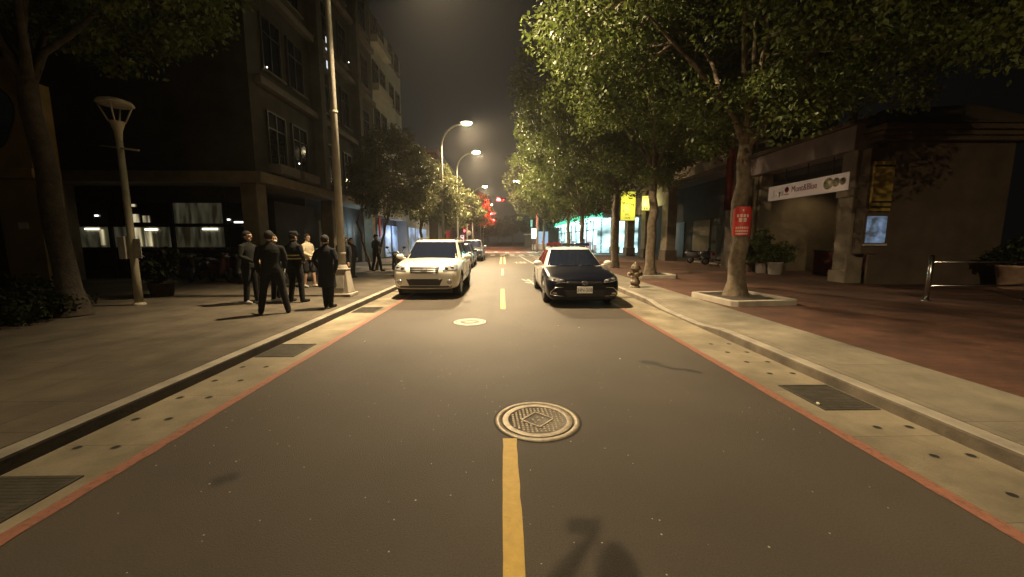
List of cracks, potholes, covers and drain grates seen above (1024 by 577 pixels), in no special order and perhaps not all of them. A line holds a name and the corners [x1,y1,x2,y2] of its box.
manhole cover [493,401,582,443]
manhole cover [452,318,487,326]
